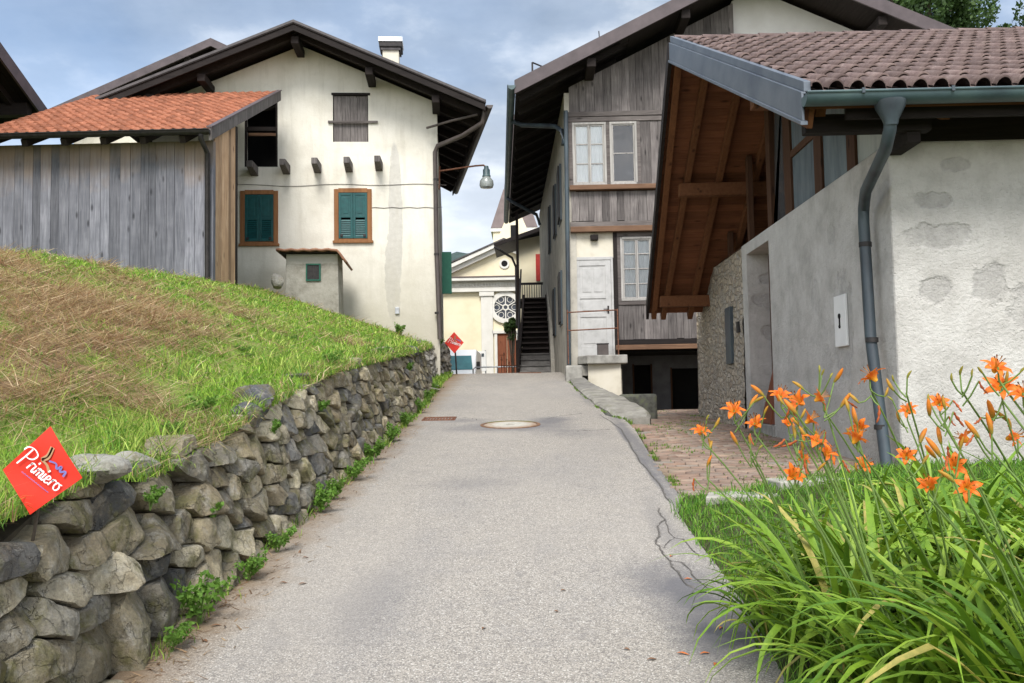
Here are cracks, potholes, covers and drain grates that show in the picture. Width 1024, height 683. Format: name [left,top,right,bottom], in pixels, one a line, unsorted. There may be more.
manhole cover [480,421,540,429]
crack [655,509,712,592]
